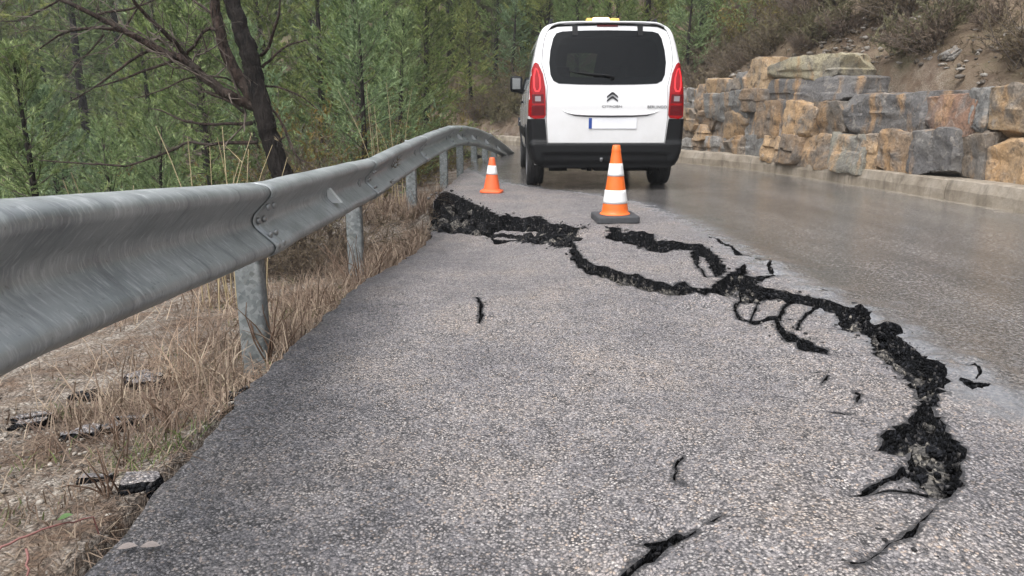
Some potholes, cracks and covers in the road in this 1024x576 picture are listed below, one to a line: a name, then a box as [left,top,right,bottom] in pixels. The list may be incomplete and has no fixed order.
crack [429,192,967,564]
